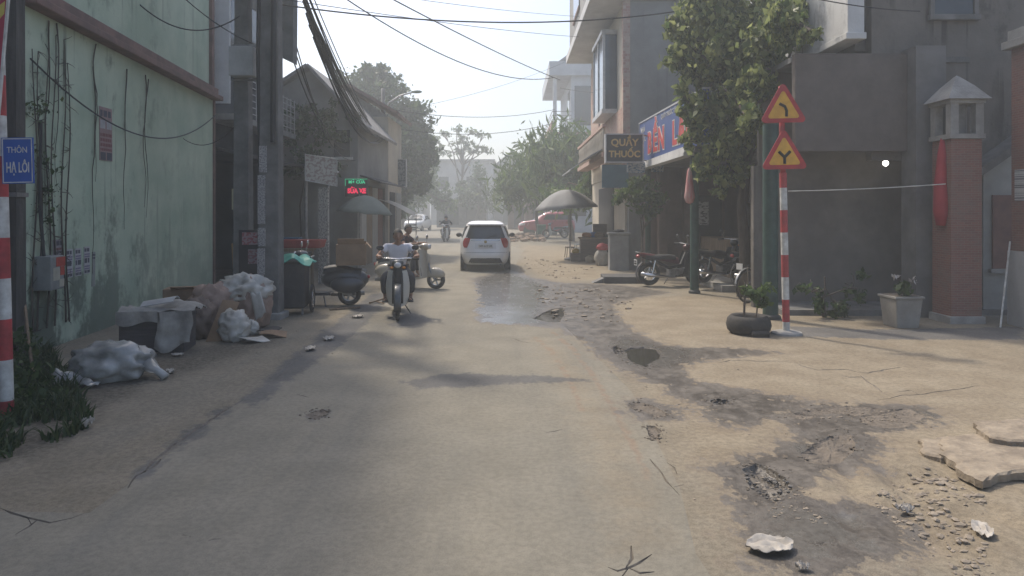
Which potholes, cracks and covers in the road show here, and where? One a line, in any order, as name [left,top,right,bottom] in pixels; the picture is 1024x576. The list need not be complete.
pothole [624,398,673,419]
pothole [299,408,331,420]
crack [650,459,681,492]
pothole [782,428,867,469]
pothole [532,305,567,325]
crack [608,546,654,576]
pothole [704,396,736,406]
pothole [736,458,811,509]
pothole [619,346,665,374]
crack [719,360,978,400]
pothole [641,424,667,445]
crack [0,508,87,535]
